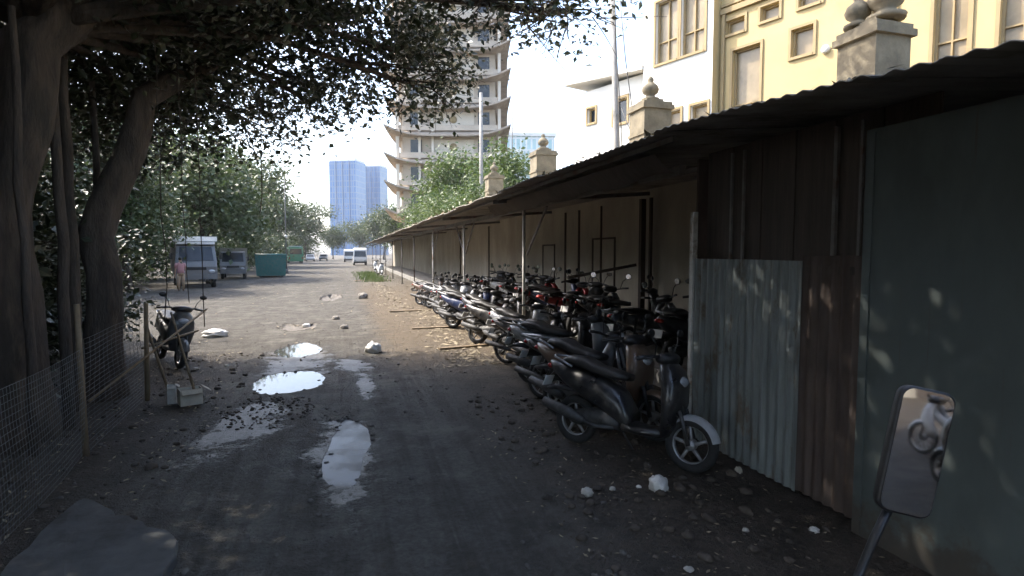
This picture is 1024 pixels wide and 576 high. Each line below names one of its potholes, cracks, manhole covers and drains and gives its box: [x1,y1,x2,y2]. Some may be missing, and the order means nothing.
pothole [276,322,321,332]
pothole [271,341,323,358]
pothole [242,370,331,395]
pothole [314,415,376,488]
